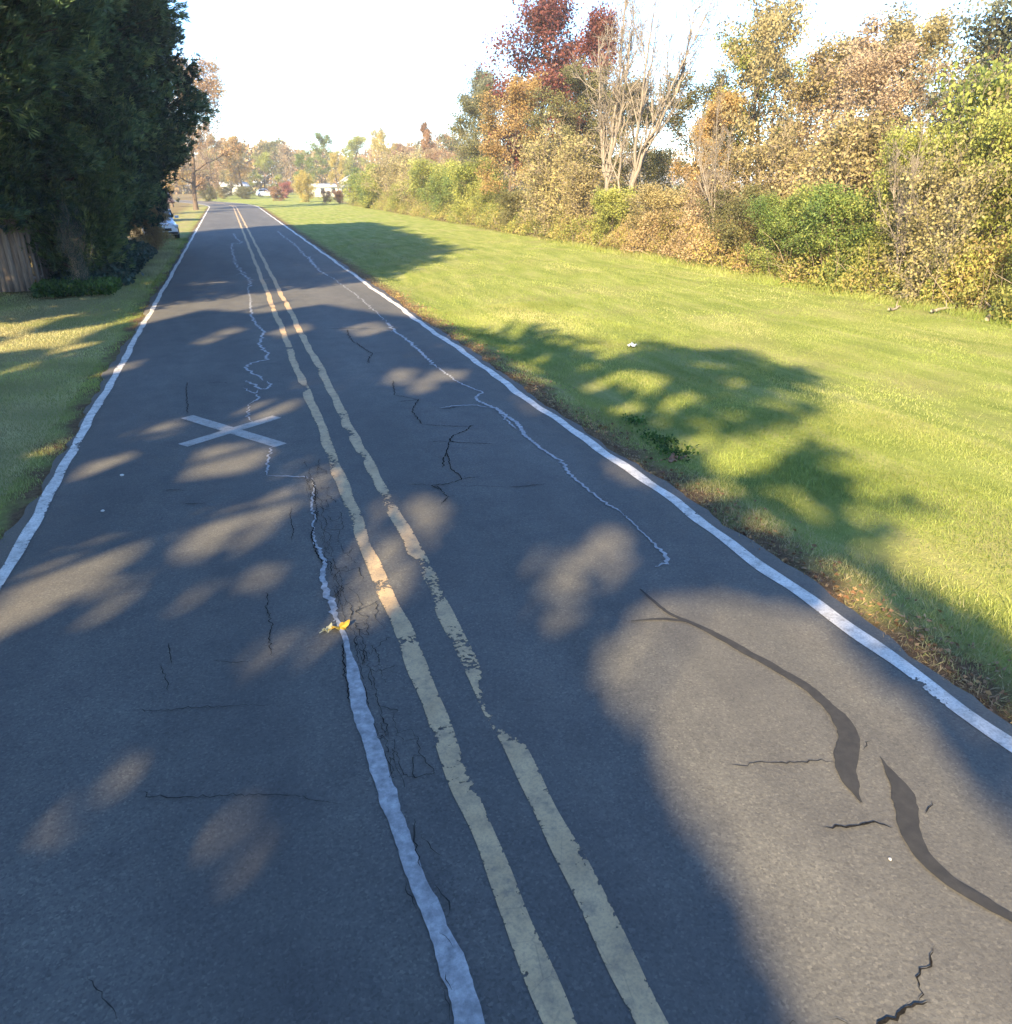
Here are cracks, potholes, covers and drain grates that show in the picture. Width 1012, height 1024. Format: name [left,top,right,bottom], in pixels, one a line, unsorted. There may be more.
crack [329,328,542,502]
crack [141,790,335,803]
crack [265,459,434,787]
crack [137,704,273,712]
crack [877,946,934,1024]
crack [828,821,891,829]
crack [405,821,452,1019]
